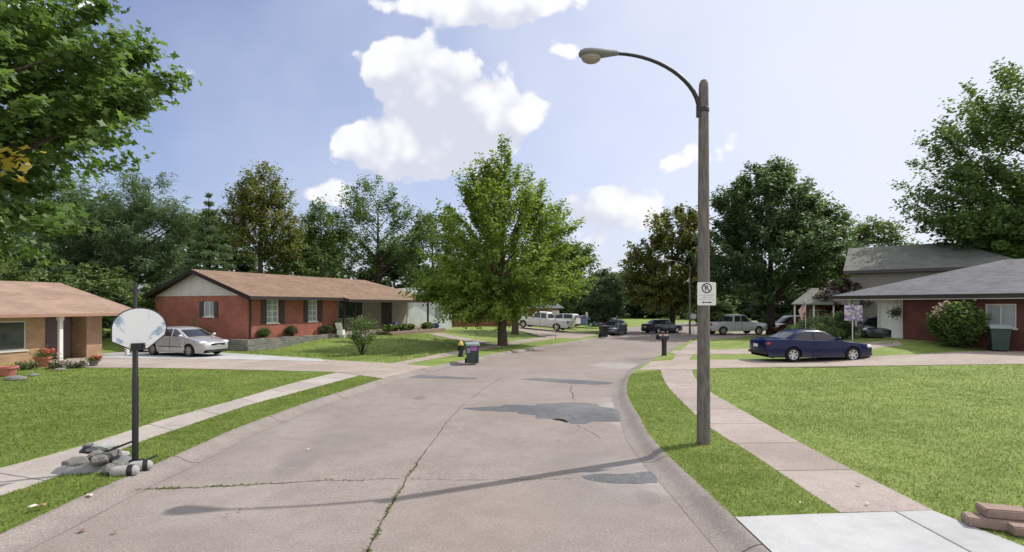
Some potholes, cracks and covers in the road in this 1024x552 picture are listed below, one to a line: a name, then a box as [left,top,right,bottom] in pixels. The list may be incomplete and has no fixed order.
crack [137,406,570,552]
